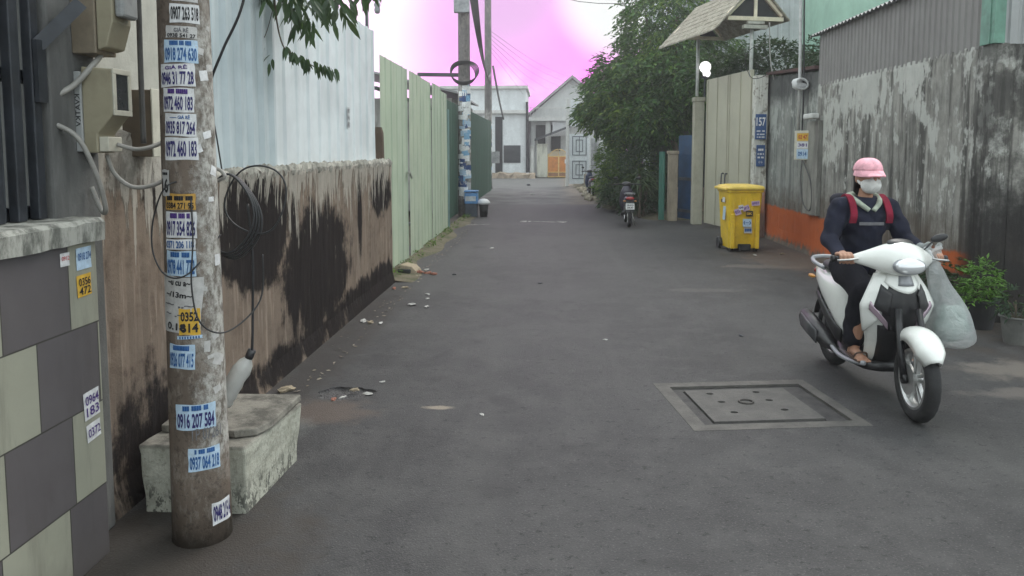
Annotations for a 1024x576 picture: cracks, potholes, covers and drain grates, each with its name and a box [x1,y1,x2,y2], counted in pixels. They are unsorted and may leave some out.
manhole cover [653,380,873,431]
pothole [317,387,377,401]
